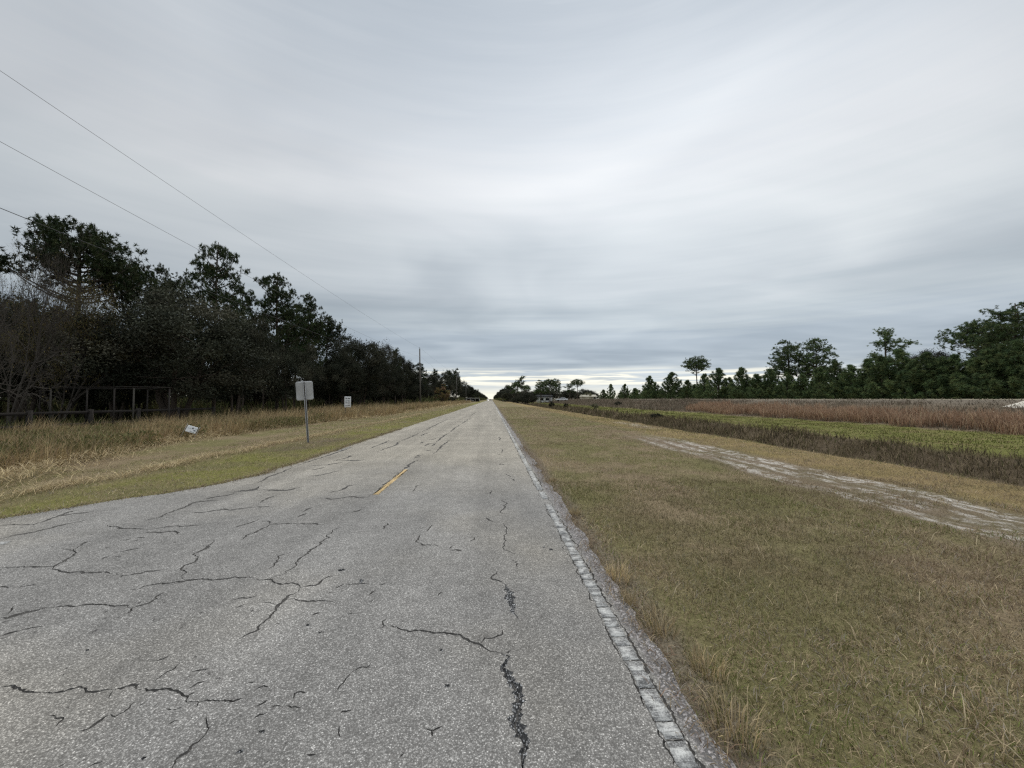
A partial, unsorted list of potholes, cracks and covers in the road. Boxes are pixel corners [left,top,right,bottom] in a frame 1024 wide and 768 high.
crack [380,437,531,768]
crack [0,656,306,768]
crack [0,412,476,639]
